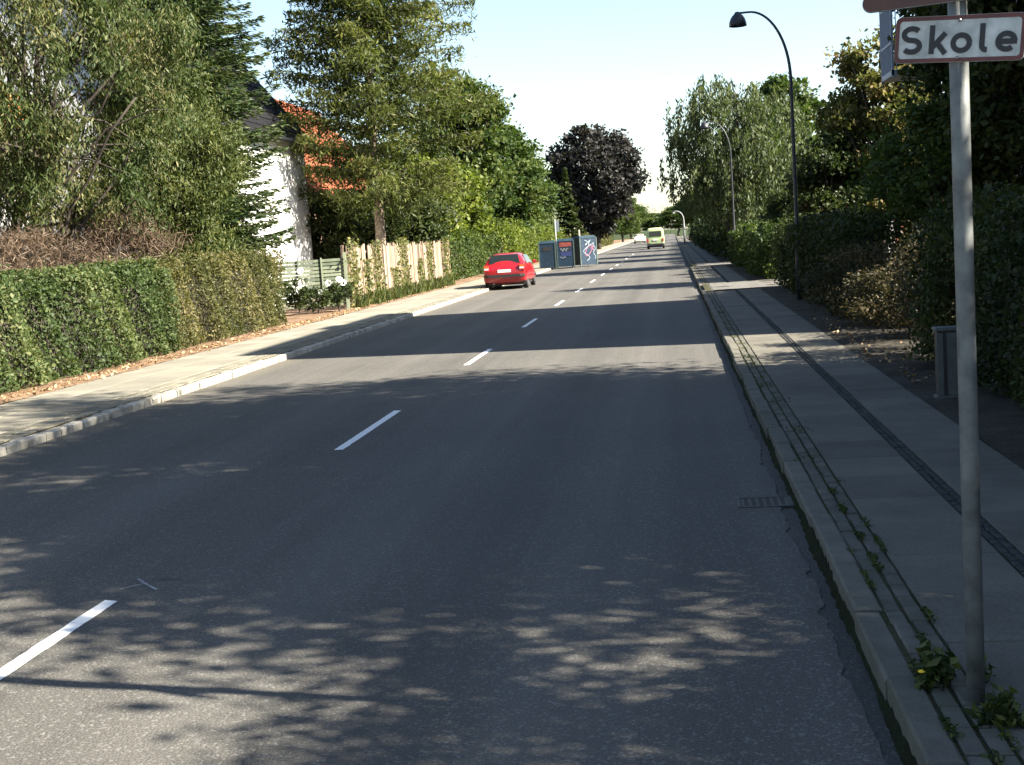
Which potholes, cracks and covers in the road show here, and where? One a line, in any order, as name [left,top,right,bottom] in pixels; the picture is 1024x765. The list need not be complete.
drain grate [735,495,795,508]
